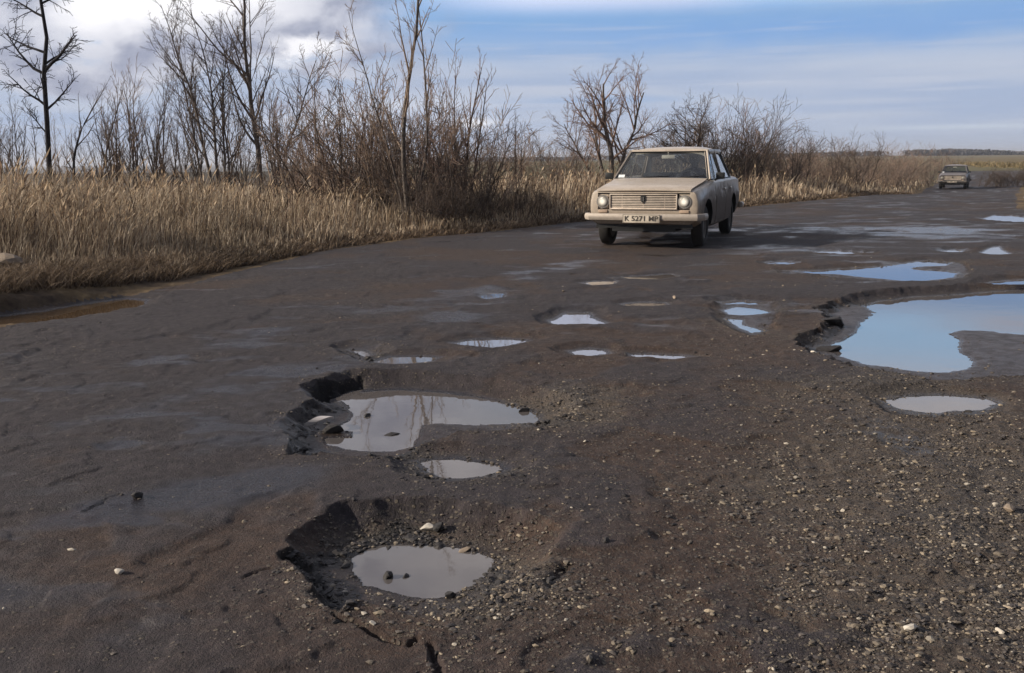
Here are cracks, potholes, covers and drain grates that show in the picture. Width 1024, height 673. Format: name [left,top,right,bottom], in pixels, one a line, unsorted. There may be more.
pothole [436,332,546,348]
pothole [0,294,157,317]
pothole [405,463,519,482]
pothole [794,291,1024,380]
pothole [553,342,625,356]
pothole [872,396,1009,419]
pothole [714,299,782,335]
pothole [307,372,368,404]
pothole [273,517,517,616]
pothole [536,307,622,324]
pothole [620,347,711,359]
pothole [285,399,554,461]
